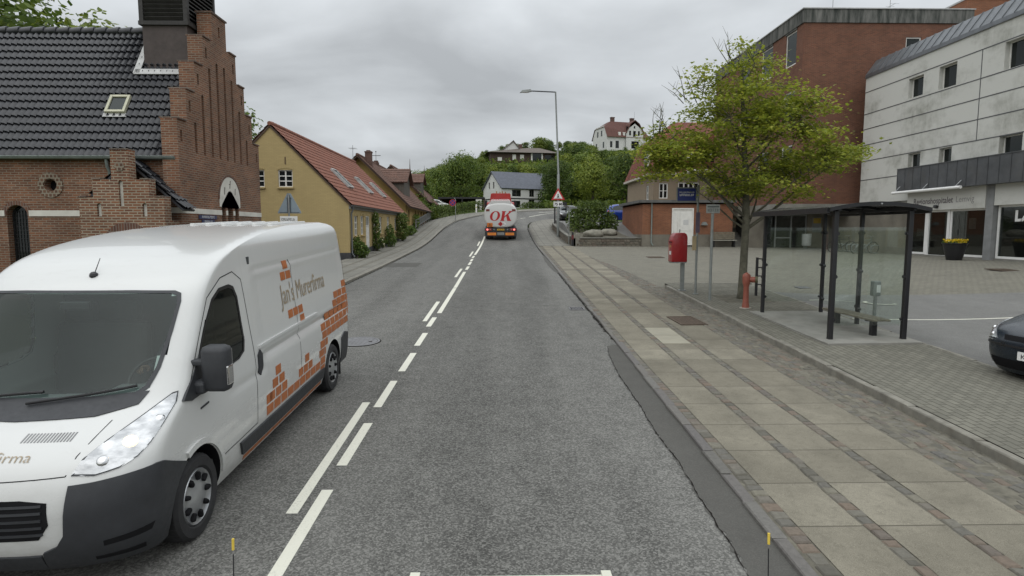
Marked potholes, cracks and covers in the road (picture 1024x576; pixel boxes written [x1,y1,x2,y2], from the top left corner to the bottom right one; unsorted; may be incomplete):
manhole cover [348,337,381,347]
manhole cover [666,316,708,325]
